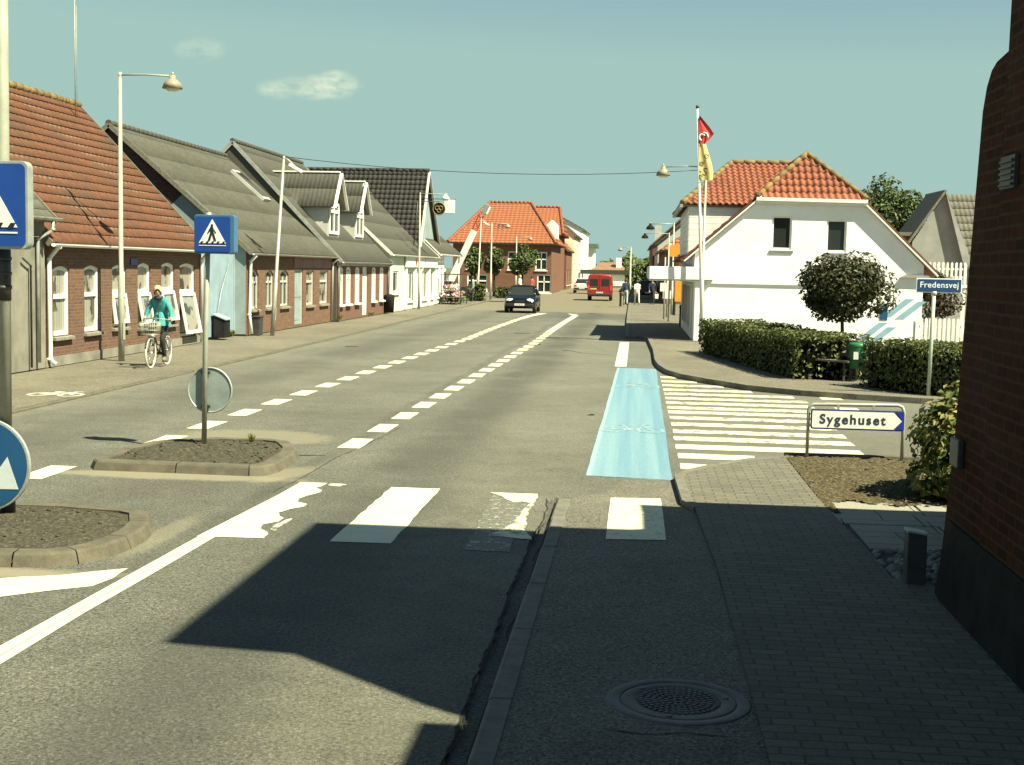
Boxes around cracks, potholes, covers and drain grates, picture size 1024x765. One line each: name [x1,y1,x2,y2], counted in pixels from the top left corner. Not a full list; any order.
manhole cover [606,679,752,726]
crack [440,498,548,765]
